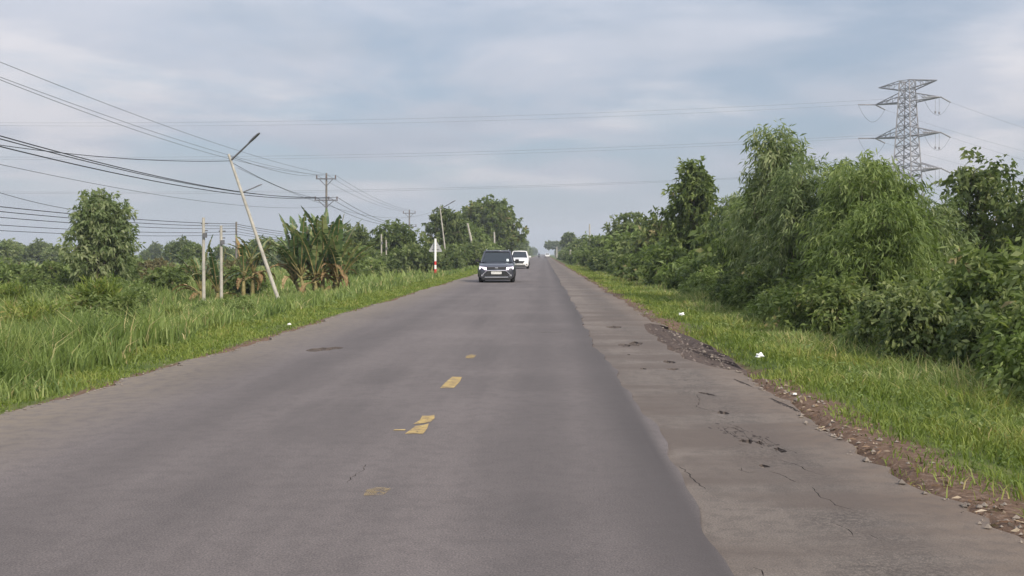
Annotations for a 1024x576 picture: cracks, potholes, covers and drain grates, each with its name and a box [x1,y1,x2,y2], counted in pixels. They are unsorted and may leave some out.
crack [679,379,876,538]
pothole [644,323,748,376]
